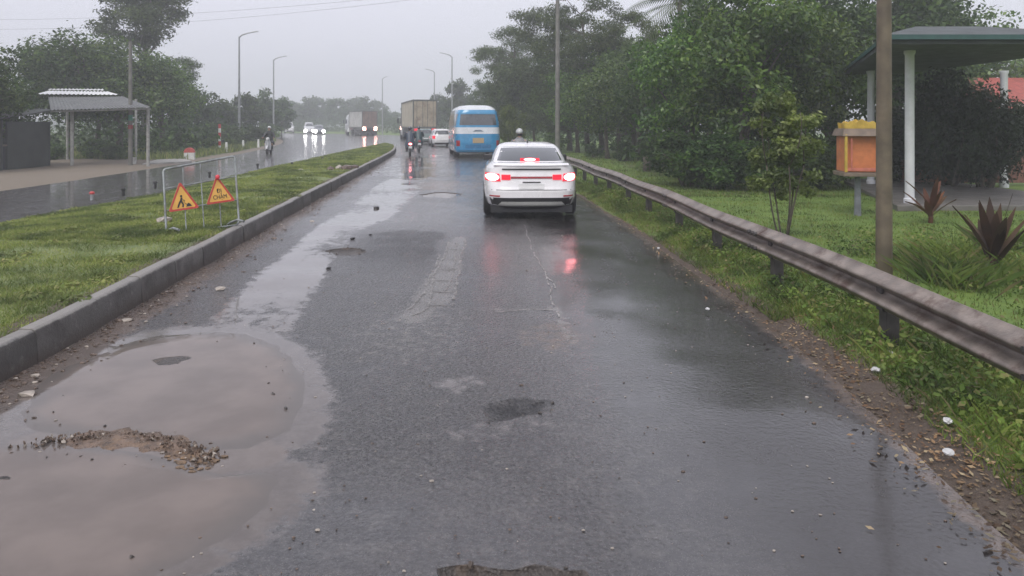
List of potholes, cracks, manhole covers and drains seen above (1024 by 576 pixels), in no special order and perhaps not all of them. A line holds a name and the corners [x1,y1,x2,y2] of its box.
crack [492,226,560,317]
pothole [323,247,366,256]
pothole [52,341,287,427]
pothole [479,396,555,423]
pothole [437,561,590,576]
